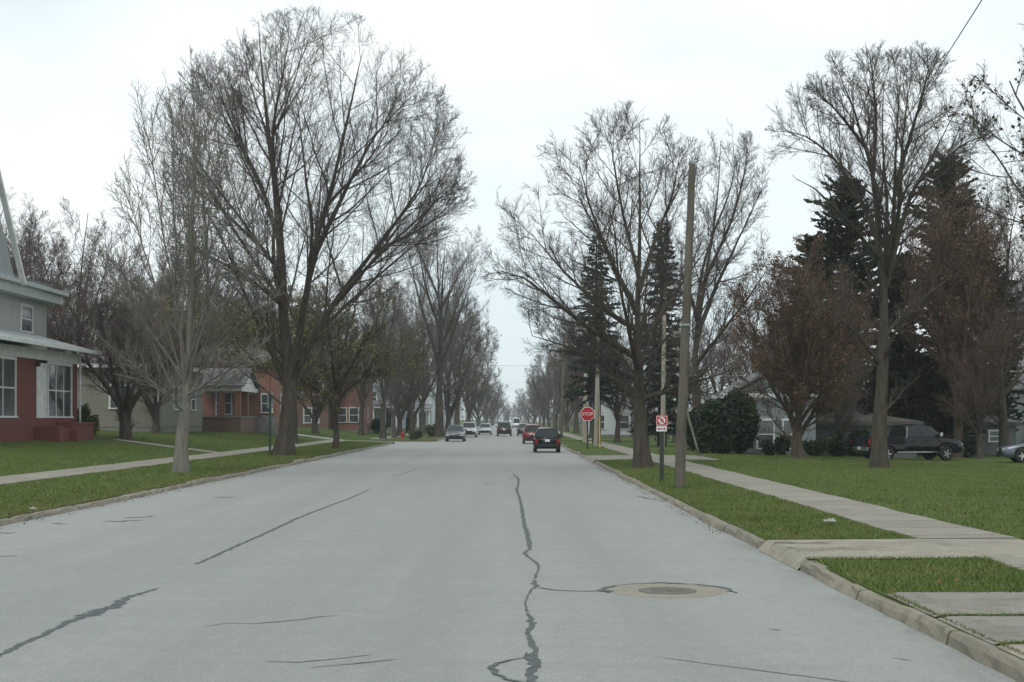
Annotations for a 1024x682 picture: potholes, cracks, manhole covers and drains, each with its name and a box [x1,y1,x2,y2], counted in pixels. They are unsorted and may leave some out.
crack [274,654,399,667]
crack [664,657,848,682]
crack [0,588,158,656]
manhole cover [597,582,738,599]
crack [487,579,575,682]
